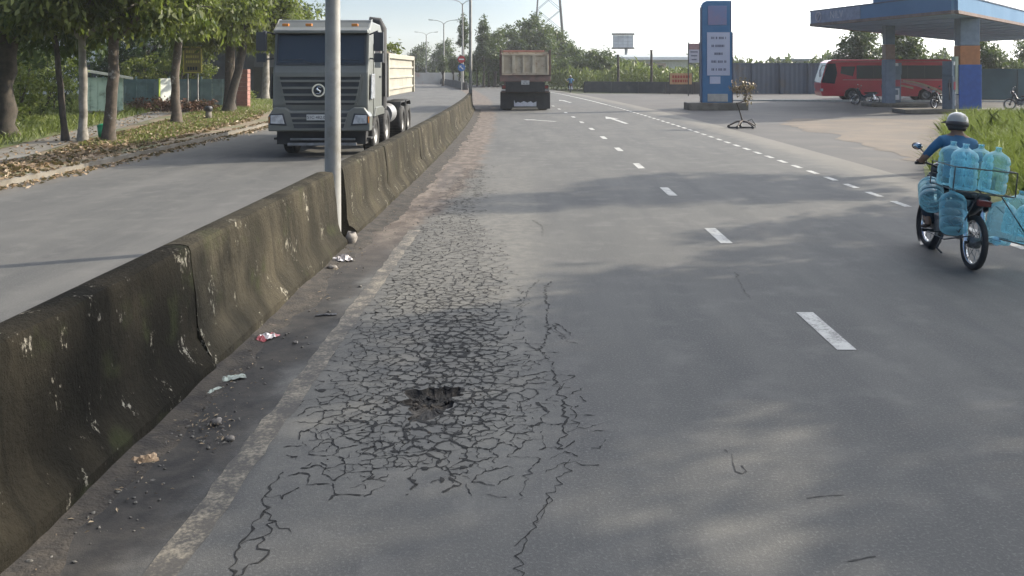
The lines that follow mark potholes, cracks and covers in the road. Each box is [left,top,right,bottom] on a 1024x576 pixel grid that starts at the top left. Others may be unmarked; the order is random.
crack [229,472,299,576]
crack [285,165,606,576]
pothole [400,385,465,422]
